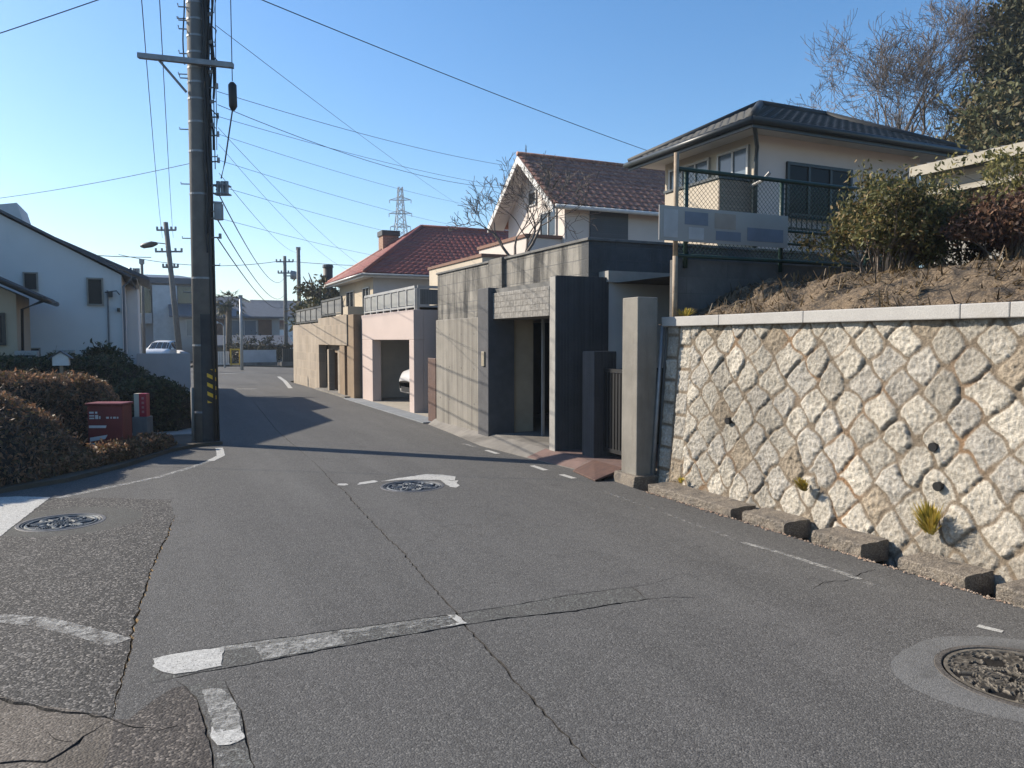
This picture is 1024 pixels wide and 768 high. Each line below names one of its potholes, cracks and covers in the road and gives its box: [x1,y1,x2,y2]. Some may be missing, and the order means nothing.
crack [0,402,699,768]
manhole cover [380,480,444,492]
manhole cover [14,513,106,532]
manhole cover [934,645,1024,708]
